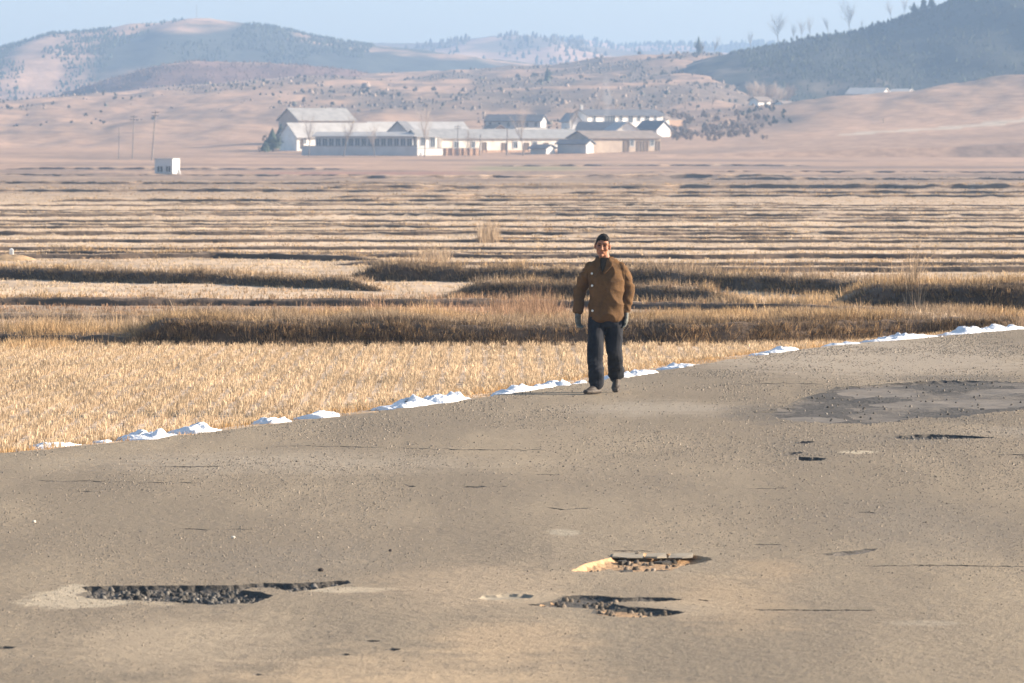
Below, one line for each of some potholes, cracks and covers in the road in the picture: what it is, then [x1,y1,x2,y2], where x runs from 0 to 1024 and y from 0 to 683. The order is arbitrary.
pothole [77,580,350,605]
pothole [572,552,712,572]
pothole [527,595,684,617]
